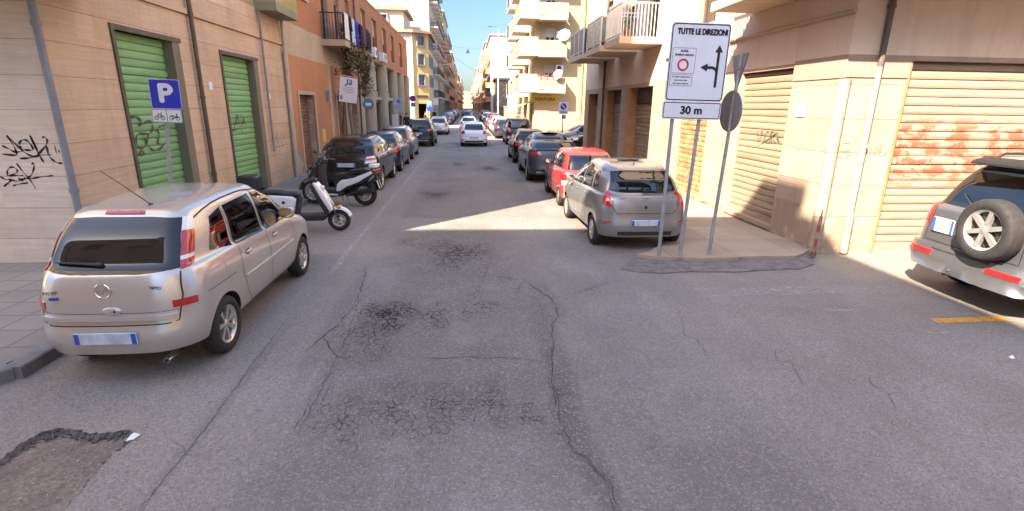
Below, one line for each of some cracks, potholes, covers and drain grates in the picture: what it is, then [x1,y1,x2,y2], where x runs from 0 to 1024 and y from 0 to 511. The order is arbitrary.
crack [294,234,623,511]
pothole [0,428,134,511]
